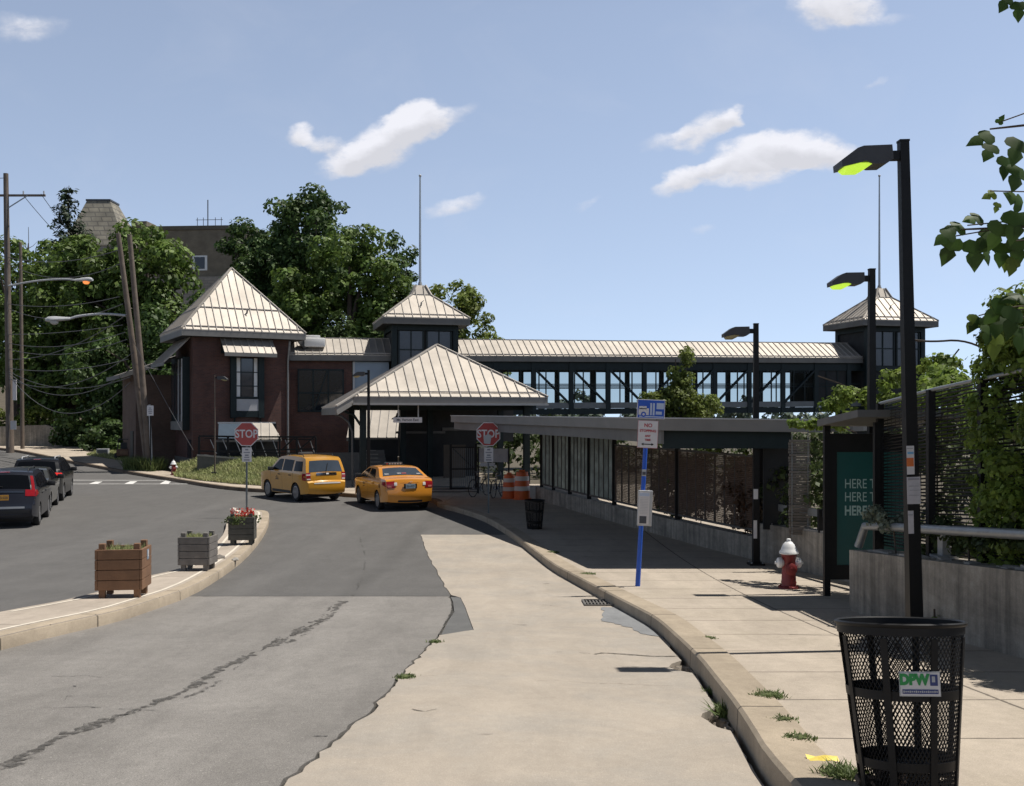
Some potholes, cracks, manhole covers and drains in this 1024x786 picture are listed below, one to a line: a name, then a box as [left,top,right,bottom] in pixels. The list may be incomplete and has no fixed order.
crack [0,538,366,769]
